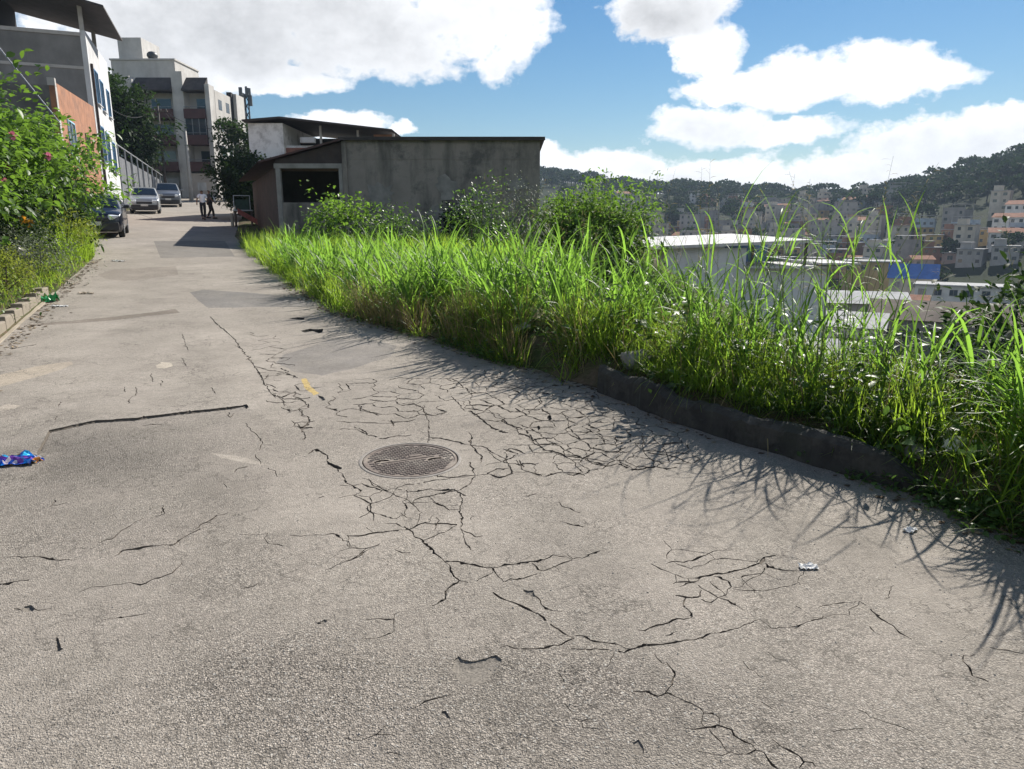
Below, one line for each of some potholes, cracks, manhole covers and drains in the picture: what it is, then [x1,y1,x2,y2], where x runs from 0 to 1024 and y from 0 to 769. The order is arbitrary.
crack [210,317,914,769]
manhole cover [359,443,461,479]
crack [78,505,226,593]
crack [962,647,1023,682]
